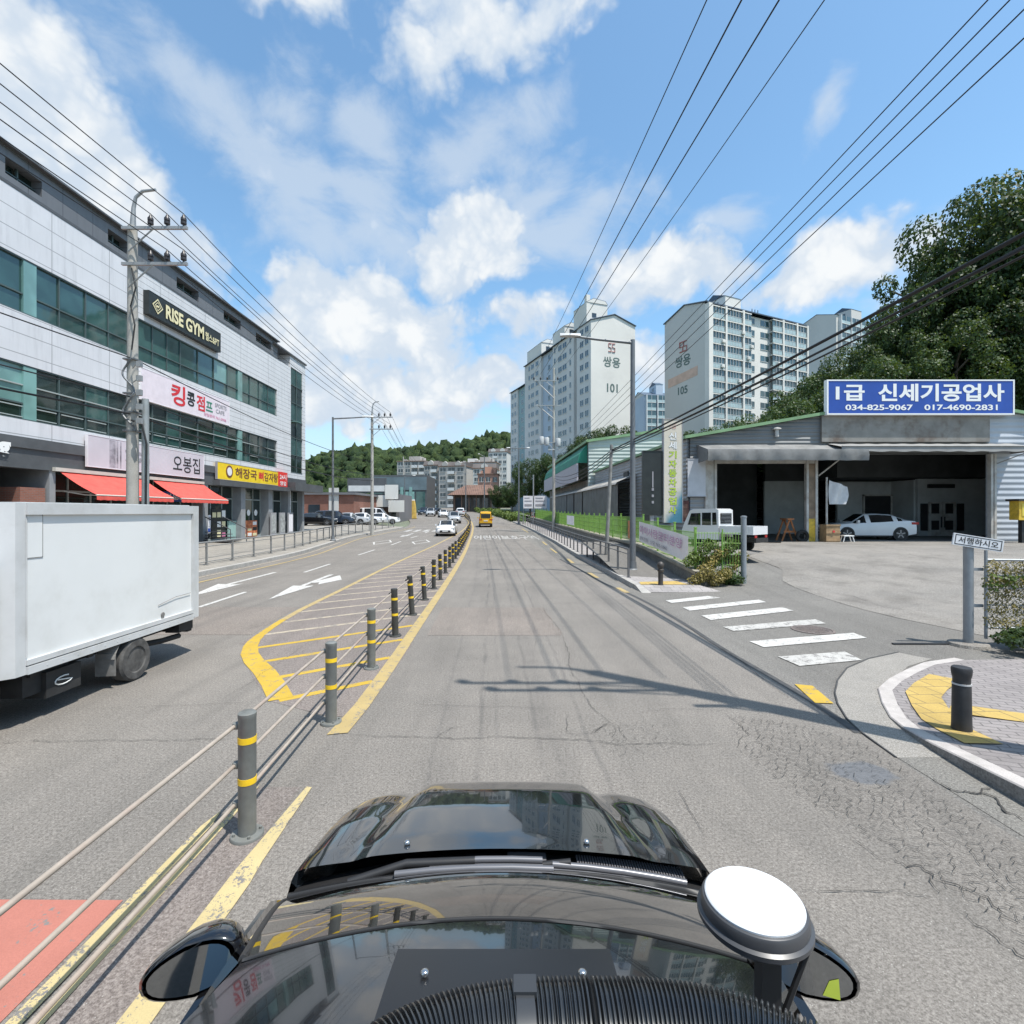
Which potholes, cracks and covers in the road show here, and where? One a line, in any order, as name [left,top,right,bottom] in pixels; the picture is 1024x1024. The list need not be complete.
manhole cover [790,625,836,635]
crack [733,717,1024,957]
